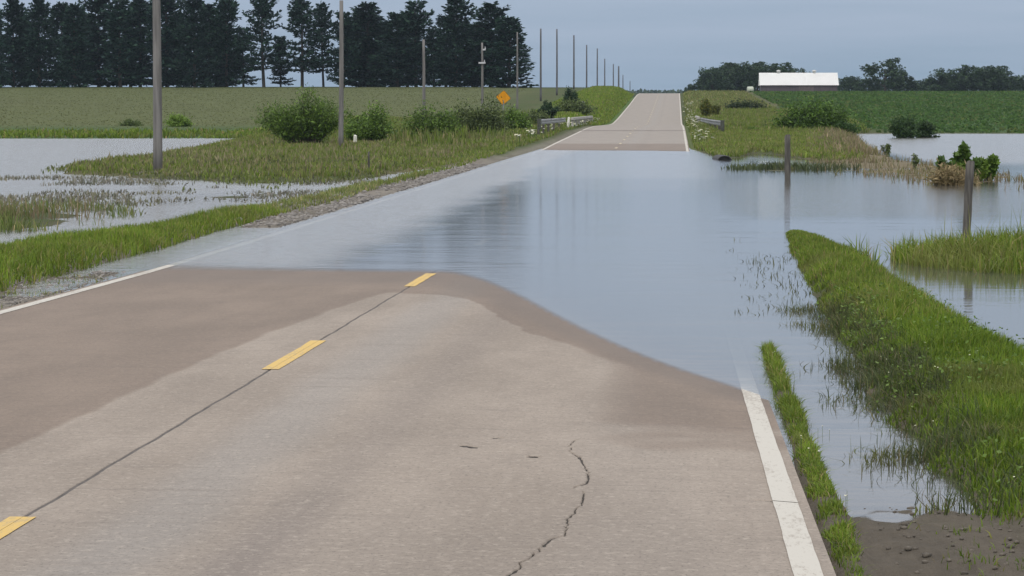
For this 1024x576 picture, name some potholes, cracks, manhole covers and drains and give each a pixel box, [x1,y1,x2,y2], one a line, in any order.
crack [508,442,590,576]
